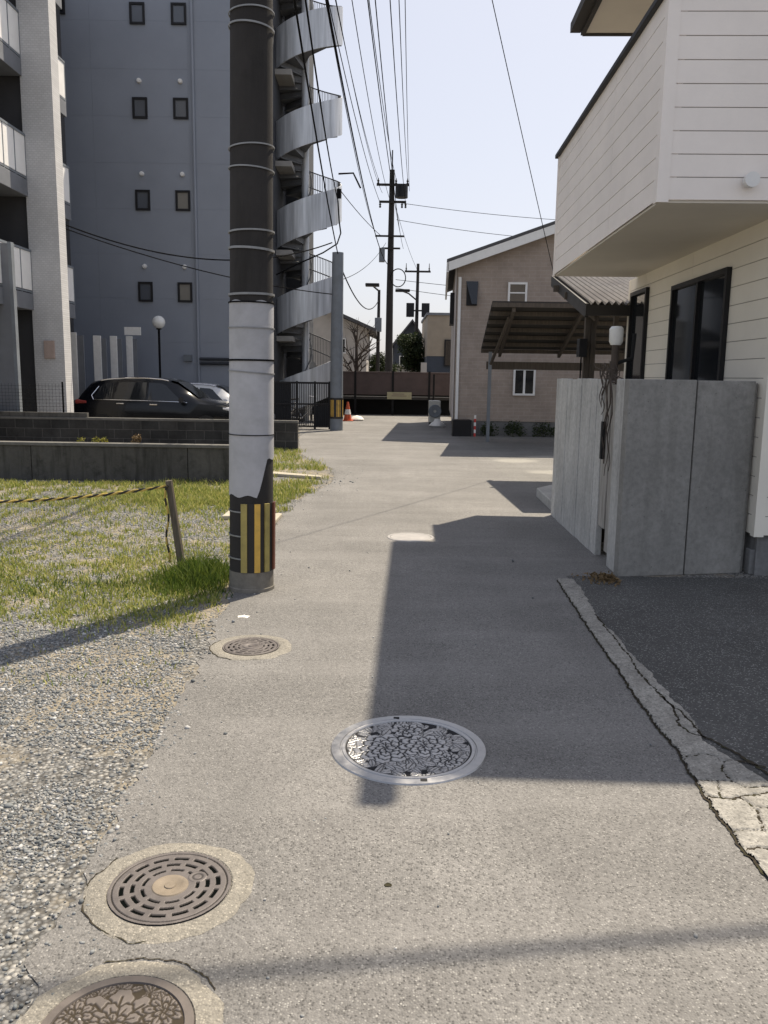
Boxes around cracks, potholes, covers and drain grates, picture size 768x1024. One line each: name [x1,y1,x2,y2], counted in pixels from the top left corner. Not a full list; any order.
manhole cover [331,716,487,786]
crack [557,580,768,875]
manhole cover [387,532,434,542]
manhole cover [16,961,224,1024]
